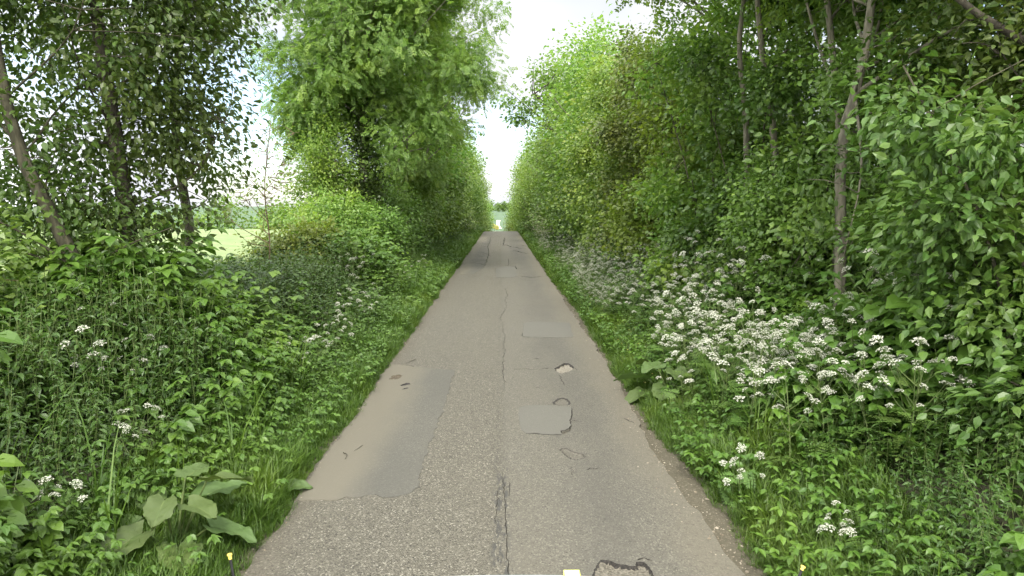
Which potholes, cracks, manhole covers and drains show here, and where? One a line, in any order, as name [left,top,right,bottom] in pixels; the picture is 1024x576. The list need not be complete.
crack [494,474,510,575]
crack [482,238,564,387]
pothole [554,363,574,374]
pothole [592,560,654,576]
